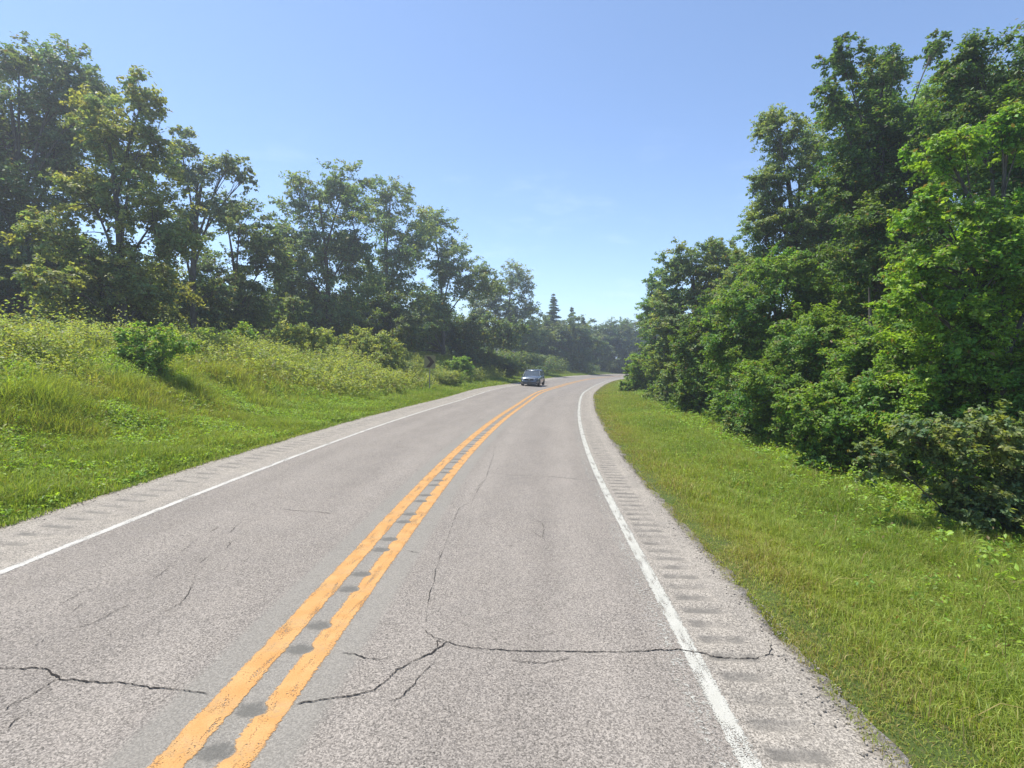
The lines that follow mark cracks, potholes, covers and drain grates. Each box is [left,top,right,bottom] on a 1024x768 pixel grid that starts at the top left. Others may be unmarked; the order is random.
crack [3,526,250,647]
crack [0,667,209,730]
crack [294,628,759,705]
crack [426,452,593,618]
